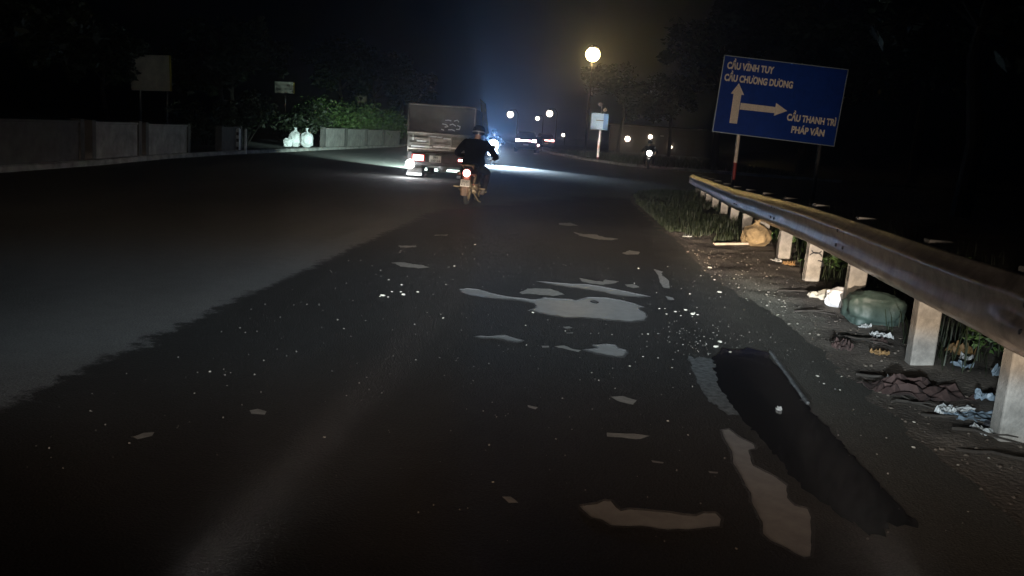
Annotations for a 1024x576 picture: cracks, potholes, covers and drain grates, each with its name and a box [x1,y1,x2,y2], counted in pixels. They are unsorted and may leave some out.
pothole [459,288,648,322]
pothole [576,499,725,532]
pothole [719,428,815,559]
pothole [582,344,629,358]
